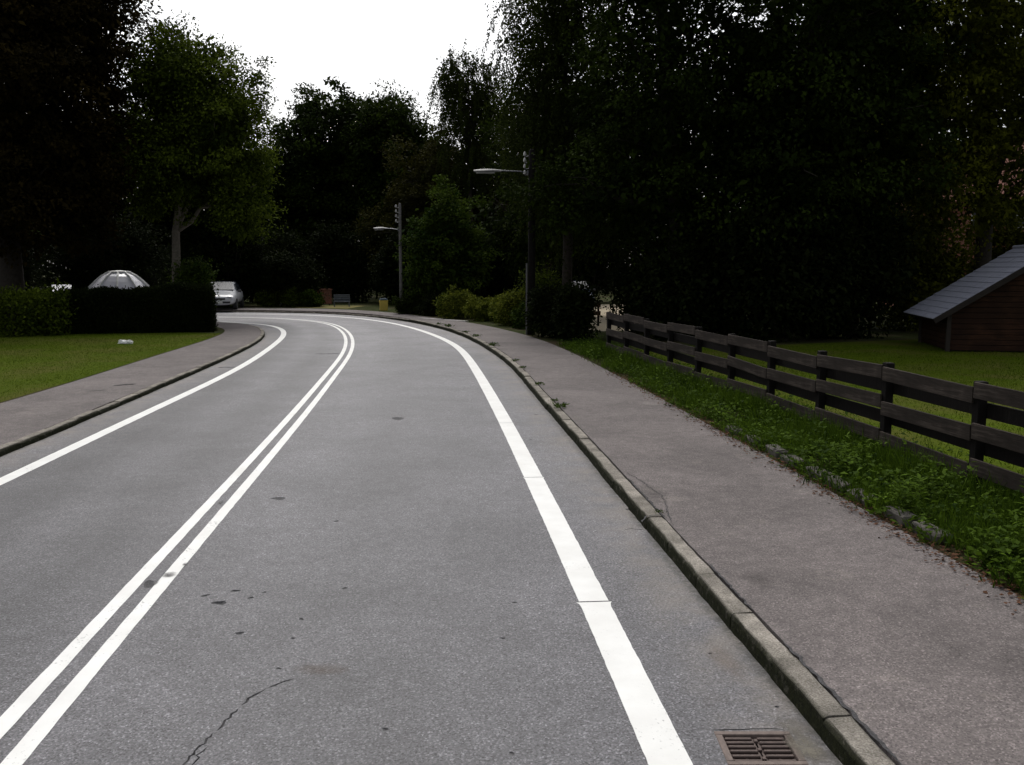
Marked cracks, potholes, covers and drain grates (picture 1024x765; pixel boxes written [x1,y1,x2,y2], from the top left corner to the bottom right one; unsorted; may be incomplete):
crack [182,679,293,765]
drain grate [714,731,809,765]
crack [626,472,672,530]
